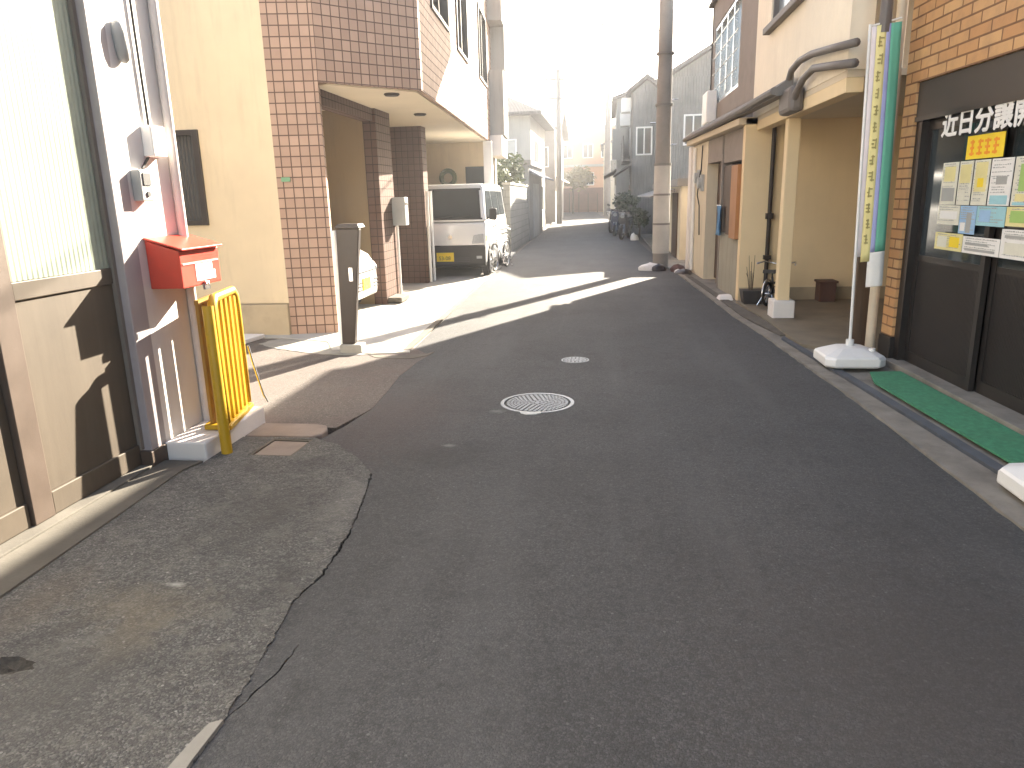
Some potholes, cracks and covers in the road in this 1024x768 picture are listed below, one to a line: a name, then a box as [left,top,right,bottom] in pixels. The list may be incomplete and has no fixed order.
crack [300,475,372,596]
utility cover [249,439,312,456]
manhole cover [501,393,574,415]
